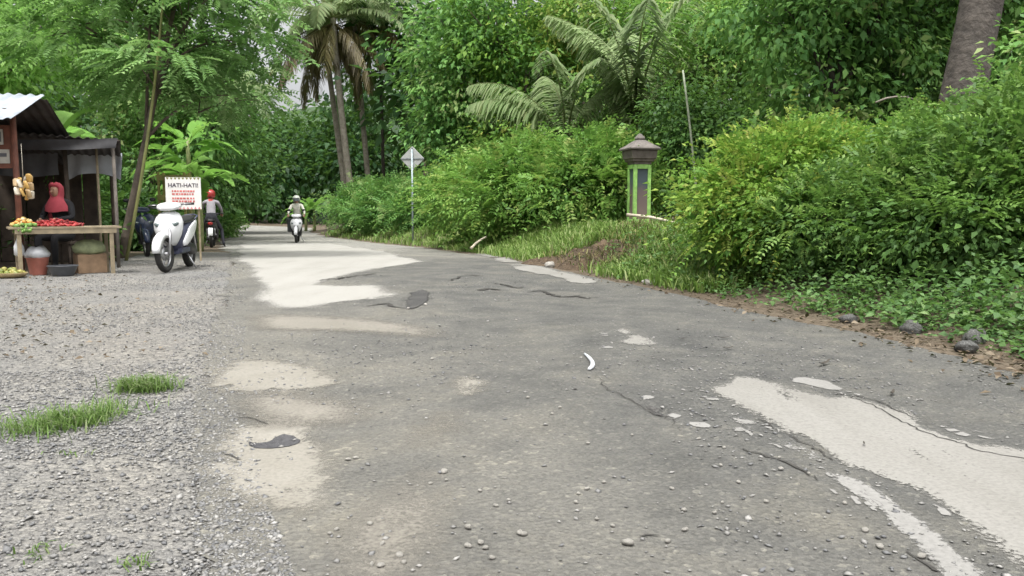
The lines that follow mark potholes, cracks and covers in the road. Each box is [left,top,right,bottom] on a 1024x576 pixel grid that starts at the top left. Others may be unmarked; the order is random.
crack [823,390,1023,458]
crack [477,275,591,299]
crack [743,418,834,479]
pothole [249,434,300,449]
crack [594,374,680,430]
pothole [405,290,429,309]
